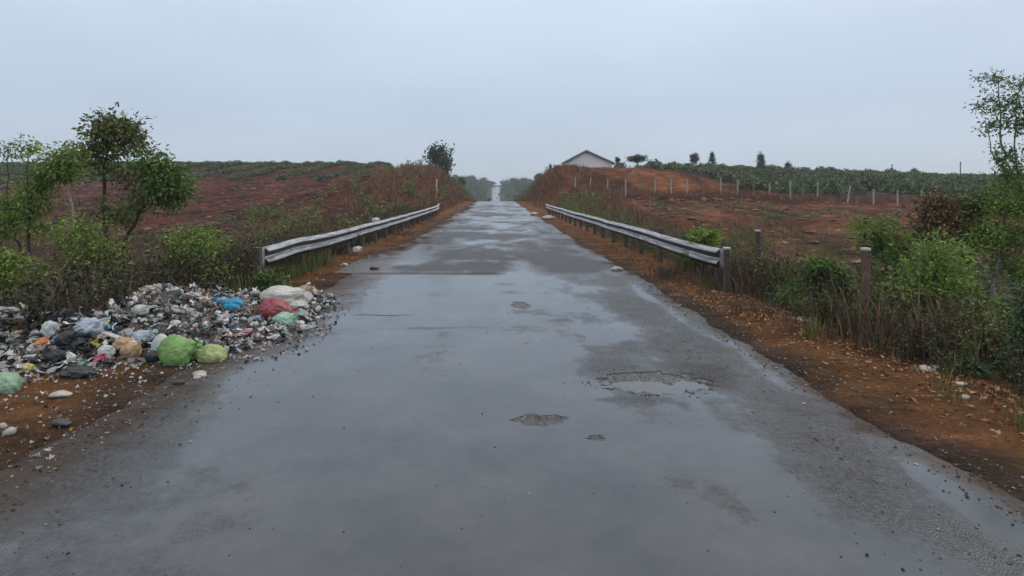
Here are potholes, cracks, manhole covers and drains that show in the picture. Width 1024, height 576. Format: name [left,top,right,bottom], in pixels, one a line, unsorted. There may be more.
pothole [510,301,531,310]
pothole [509,414,569,426]
pothole [597,369,719,399]
